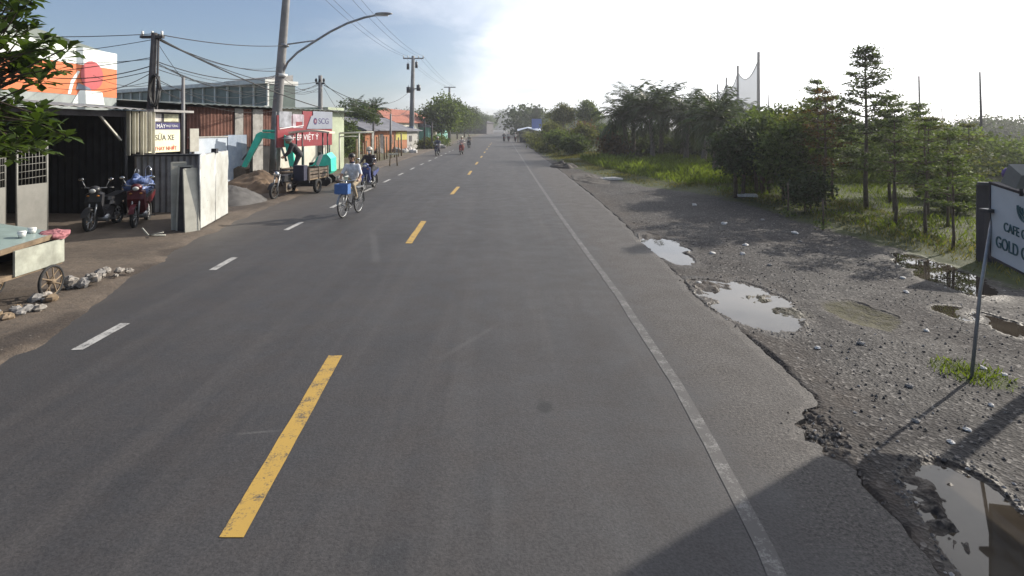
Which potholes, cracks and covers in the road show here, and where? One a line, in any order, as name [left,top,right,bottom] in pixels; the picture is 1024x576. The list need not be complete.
pothole [955,307,1024,343]
pothole [677,272,832,346]
pothole [921,303,990,326]
pothole [787,408,866,470]
pothole [875,438,1024,576]
pothole [876,246,1024,309]
pothole [631,227,708,273]
